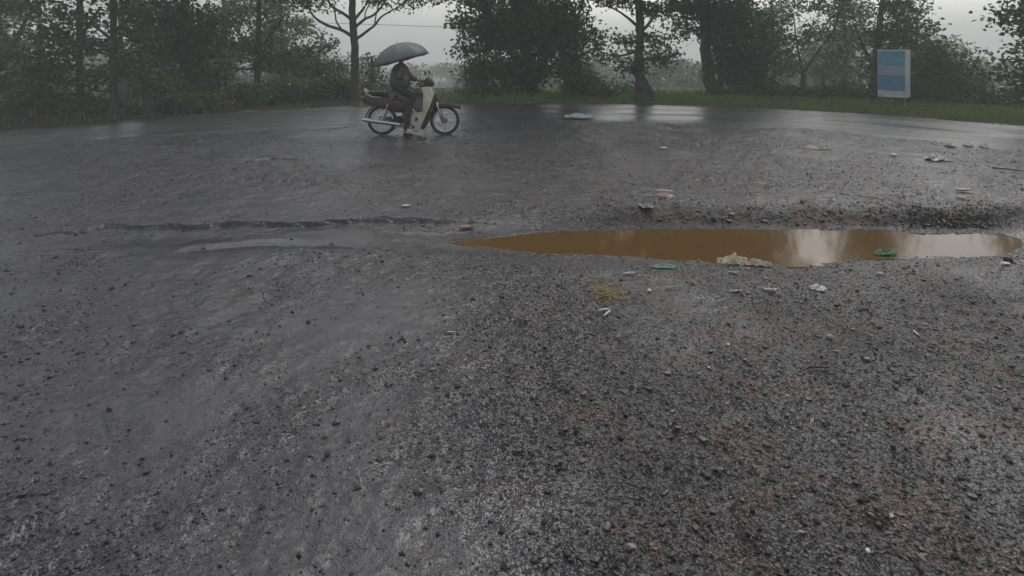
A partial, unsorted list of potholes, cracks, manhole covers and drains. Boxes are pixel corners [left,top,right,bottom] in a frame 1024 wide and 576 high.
crack [21,216,435,238]
pothole [450,227,1024,268]
